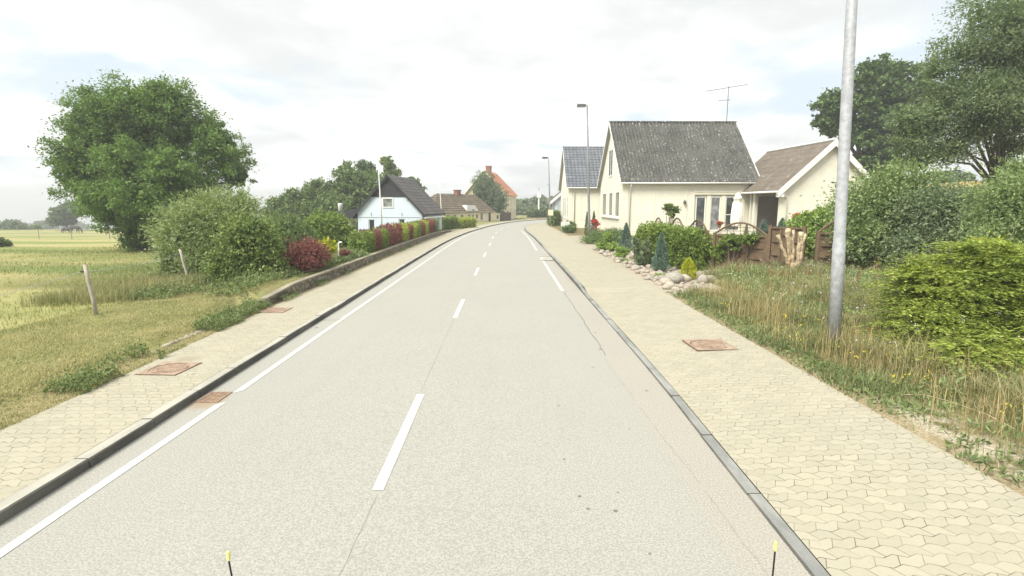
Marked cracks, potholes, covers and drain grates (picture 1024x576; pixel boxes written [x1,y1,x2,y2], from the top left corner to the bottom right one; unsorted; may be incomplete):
crack [563,291,769,576]
manhole cover [682,339,739,351]
manhole cover [134,362,203,375]
